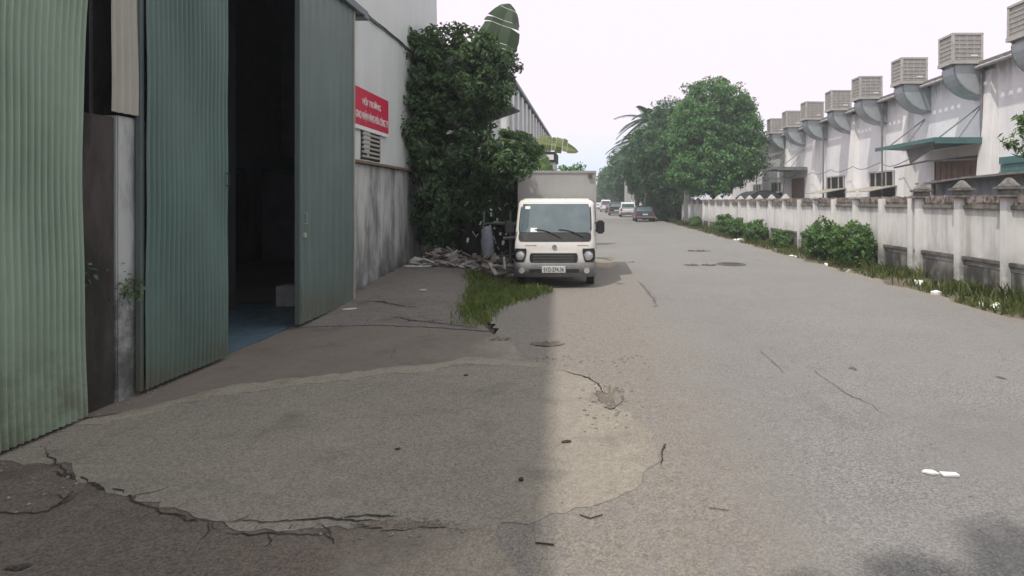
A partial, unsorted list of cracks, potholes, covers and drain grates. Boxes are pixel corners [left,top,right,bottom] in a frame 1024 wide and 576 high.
crack [0,446,334,547]
